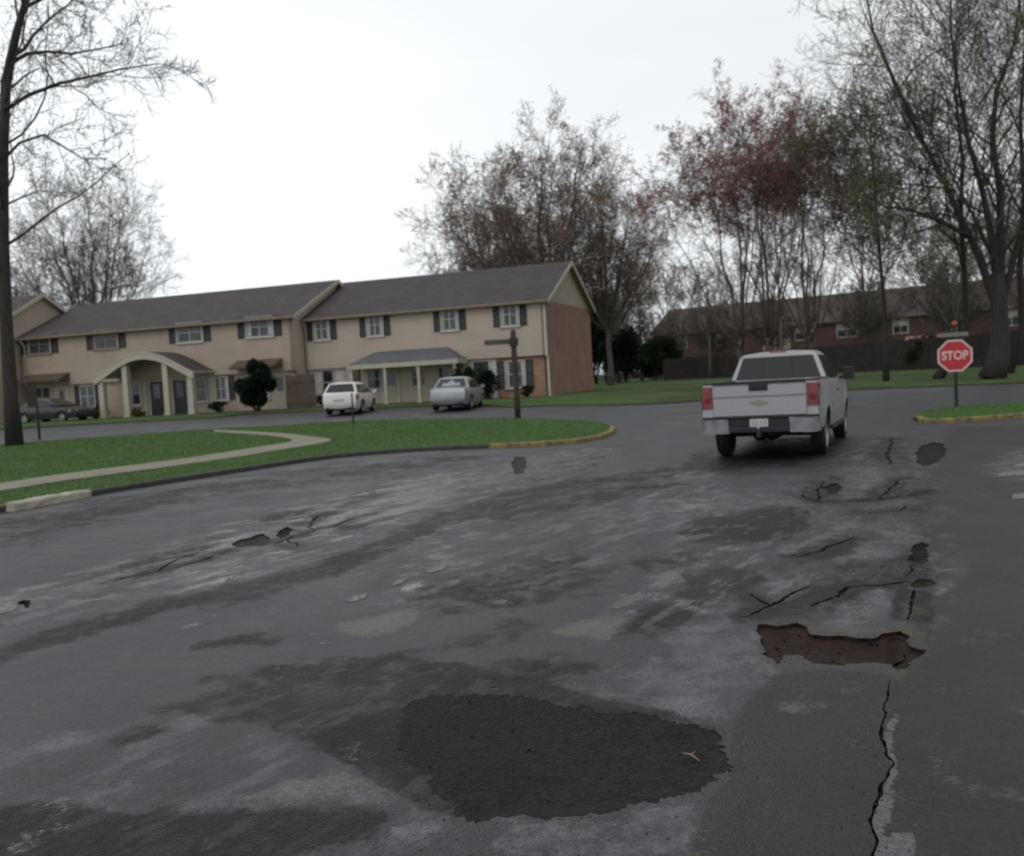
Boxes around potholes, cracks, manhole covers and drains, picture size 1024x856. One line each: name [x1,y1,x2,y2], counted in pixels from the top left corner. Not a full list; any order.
crack [801,437,934,513]
pothole [511,457,527,474]
pothole [822,483,843,494]
pothole [907,542,930,563]
crack [868,680,895,856]
crack [791,537,854,557]
crack [744,581,911,618]
crack [112,546,232,583]
pothole [276,526,293,538]
pothole [232,534,272,548]
pothole [914,443,946,466]
pothole [756,623,926,670]
